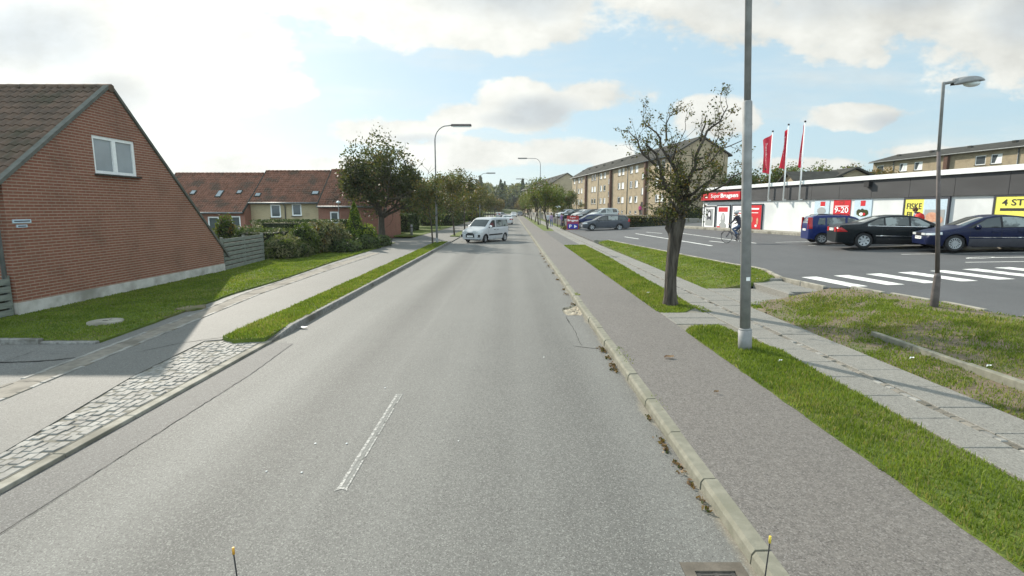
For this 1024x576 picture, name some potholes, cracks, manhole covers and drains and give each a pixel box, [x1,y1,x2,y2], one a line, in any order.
pothole [562,305,582,315]
manhole cover [86,318,124,326]
